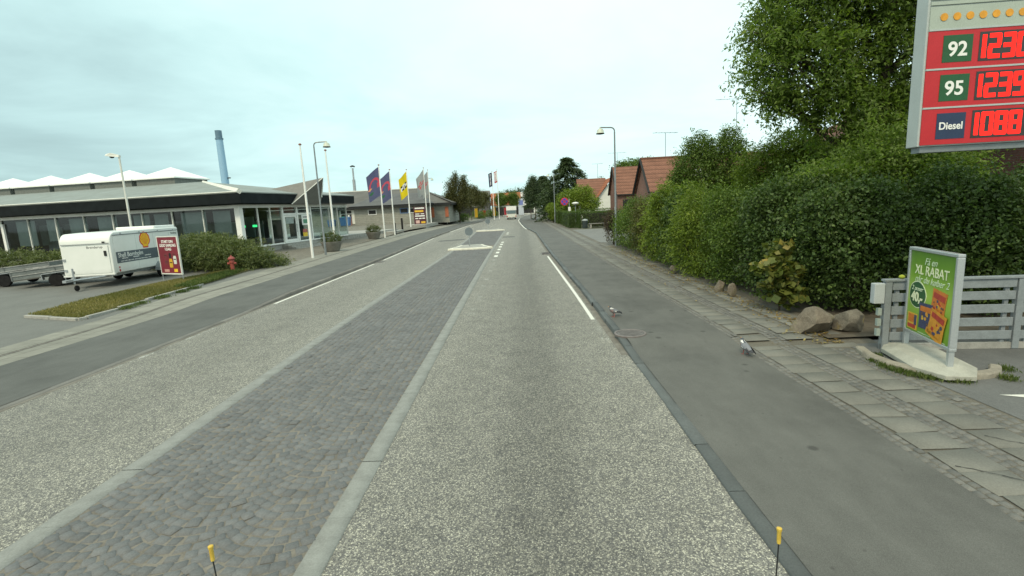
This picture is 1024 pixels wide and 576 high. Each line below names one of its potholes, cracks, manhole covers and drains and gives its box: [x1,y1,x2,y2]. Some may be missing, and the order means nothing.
manhole cover [614,329,646,338]
